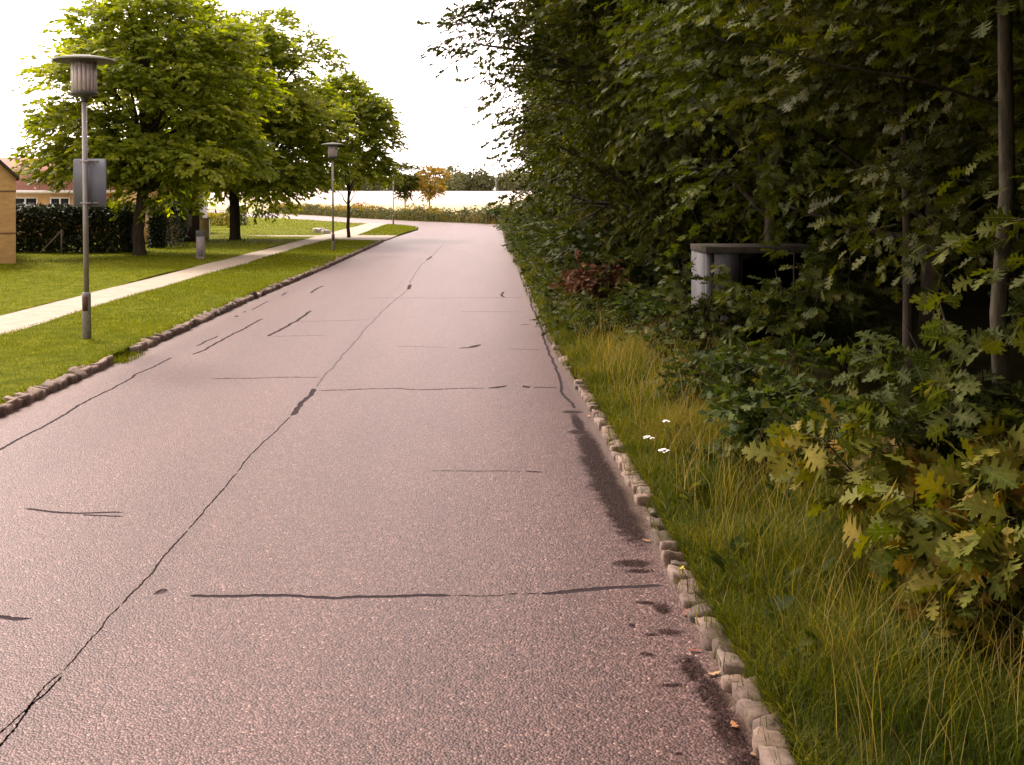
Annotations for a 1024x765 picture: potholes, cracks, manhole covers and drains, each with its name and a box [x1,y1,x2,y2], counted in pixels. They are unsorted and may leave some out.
crack [0,245,663,747]
